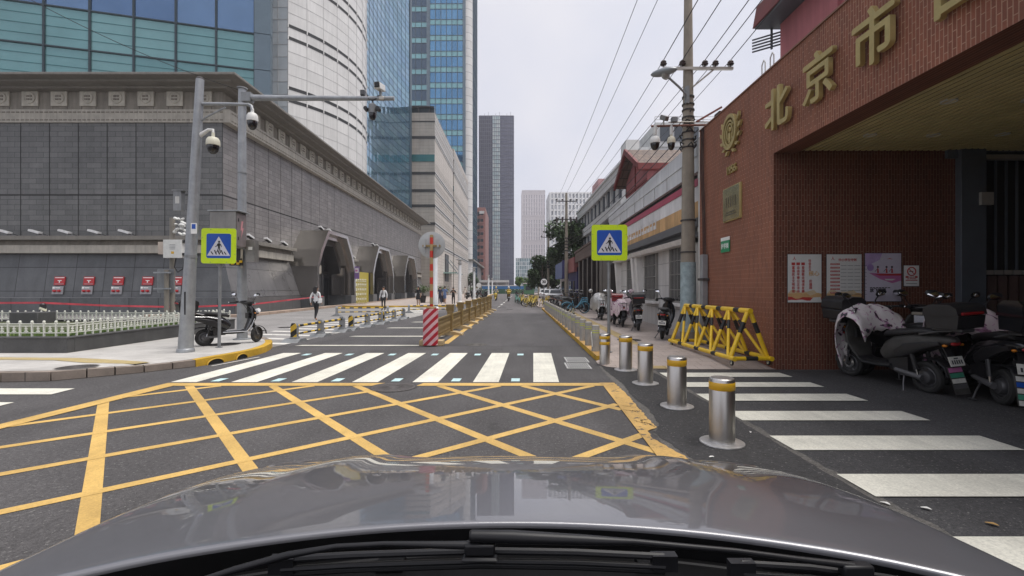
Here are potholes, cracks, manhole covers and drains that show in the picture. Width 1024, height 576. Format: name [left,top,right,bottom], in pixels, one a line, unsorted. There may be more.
manhole cover [369,382,417,392]
